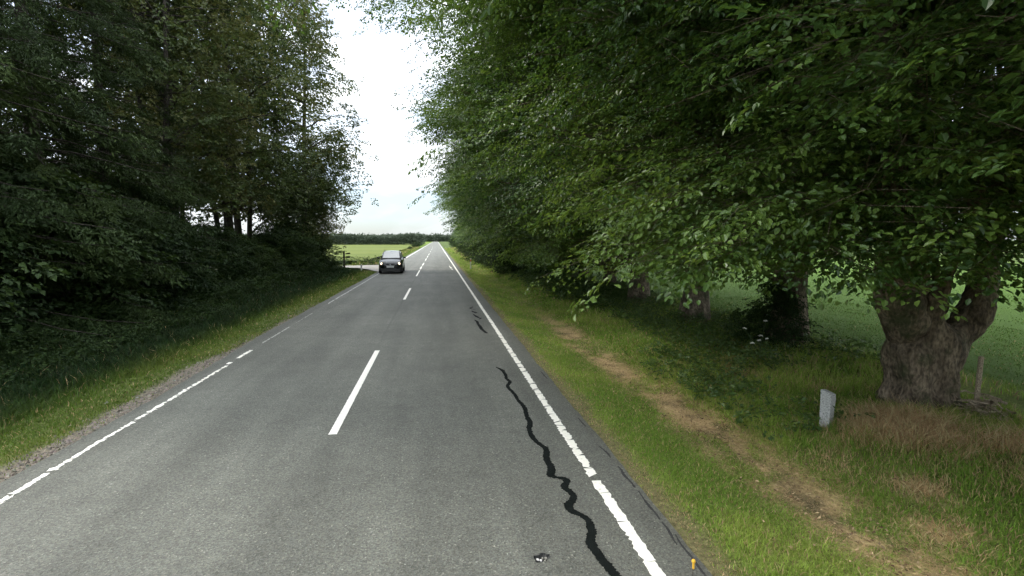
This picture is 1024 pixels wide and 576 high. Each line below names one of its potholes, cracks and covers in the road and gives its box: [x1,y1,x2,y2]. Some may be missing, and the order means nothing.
crack [541,372,707,576]
crack [470,307,487,333]
